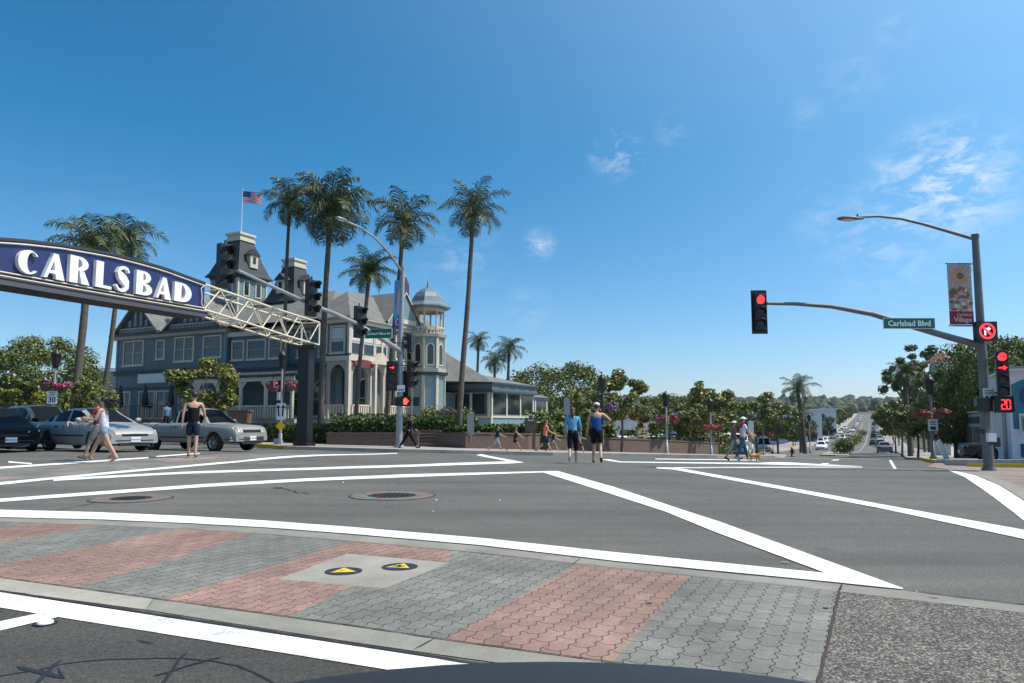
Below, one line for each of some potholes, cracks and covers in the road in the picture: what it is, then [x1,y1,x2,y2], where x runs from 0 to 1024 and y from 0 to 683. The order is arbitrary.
manhole cover [86,494,174,503]
manhole cover [348,491,436,501]
